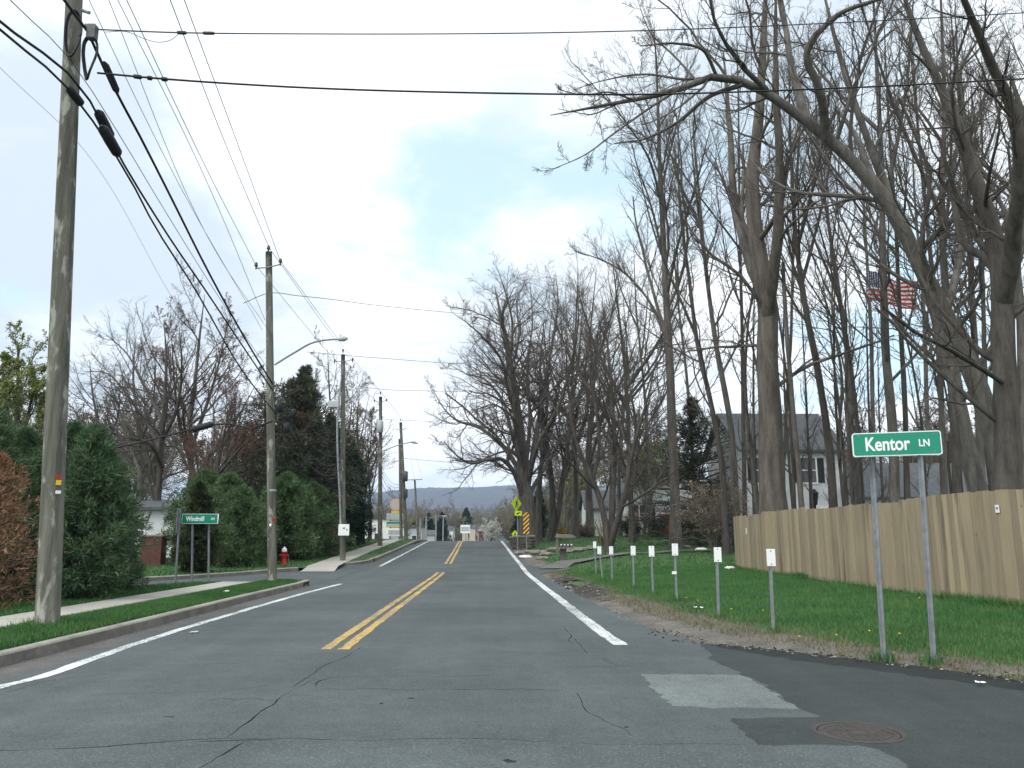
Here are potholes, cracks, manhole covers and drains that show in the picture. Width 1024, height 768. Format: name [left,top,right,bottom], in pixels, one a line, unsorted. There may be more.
manhole cover [812,722,907,744]
crack [0,647,747,768]
crack [524,615,636,668]
